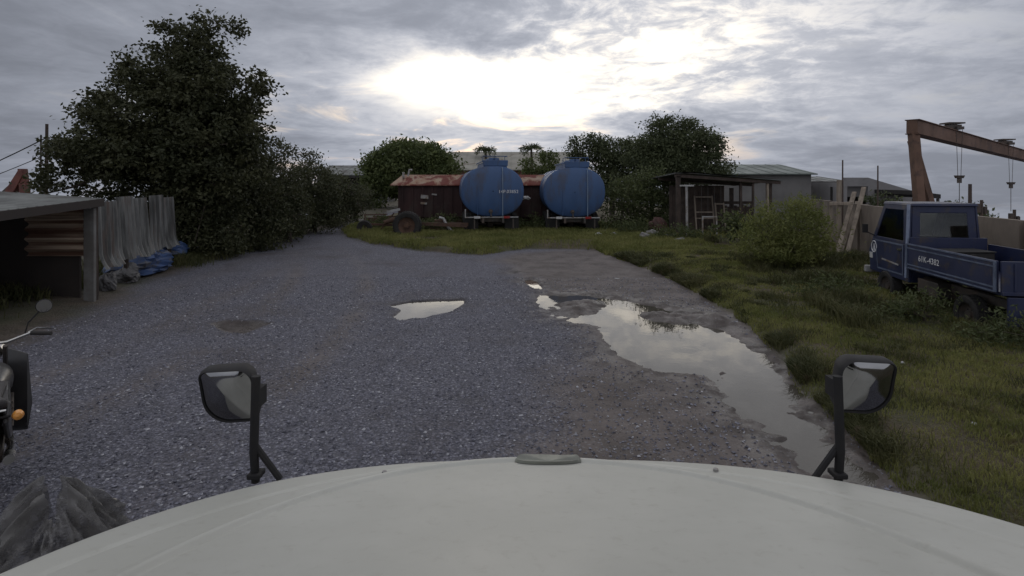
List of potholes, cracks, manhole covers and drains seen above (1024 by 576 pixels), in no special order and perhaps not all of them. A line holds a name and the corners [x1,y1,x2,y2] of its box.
pothole [388,298,468,320]
pothole [520,277,549,290]
pothole [527,291,901,487]
